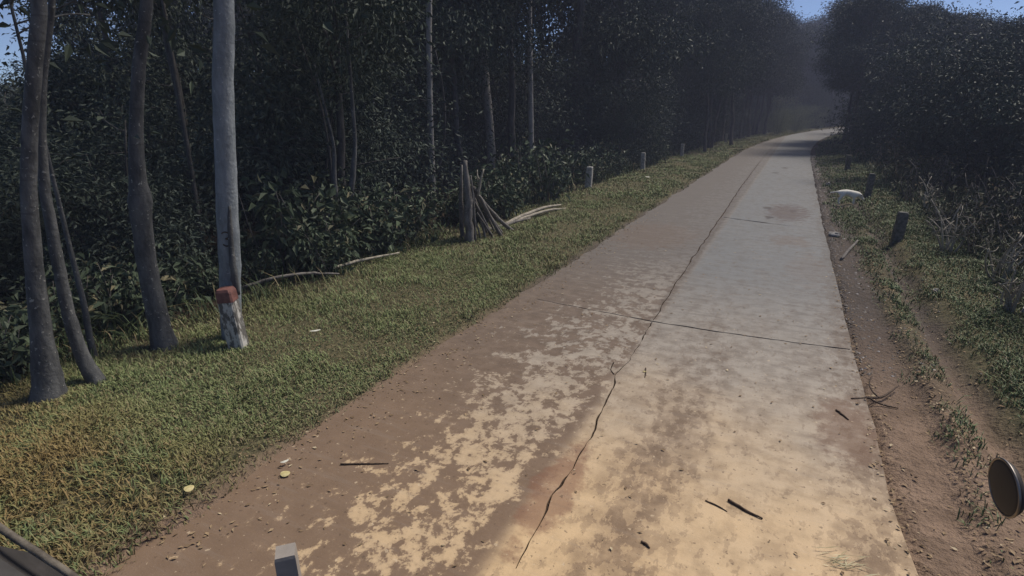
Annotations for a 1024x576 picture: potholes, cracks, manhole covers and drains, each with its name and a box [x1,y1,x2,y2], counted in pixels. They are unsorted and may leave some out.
crack [516,302,844,568]
